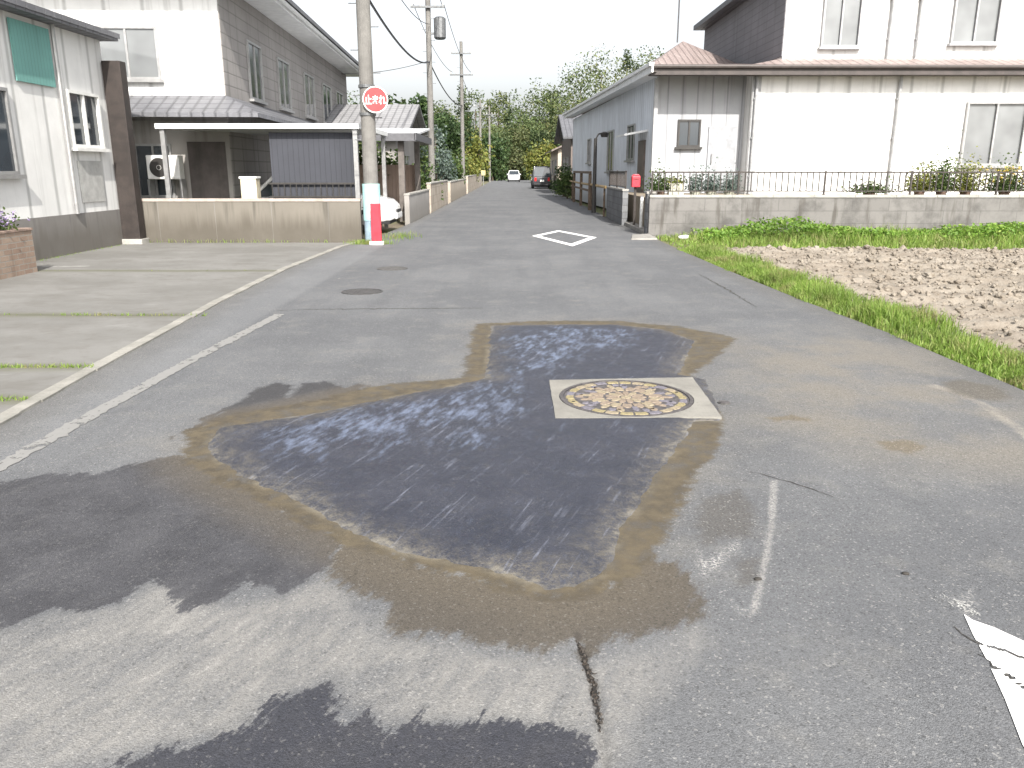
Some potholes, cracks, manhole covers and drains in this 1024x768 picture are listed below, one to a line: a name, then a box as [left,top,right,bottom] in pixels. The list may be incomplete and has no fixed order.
crack [576,637,604,732]
manhole cover [549,377,722,419]
crack [955,627,1024,687]
